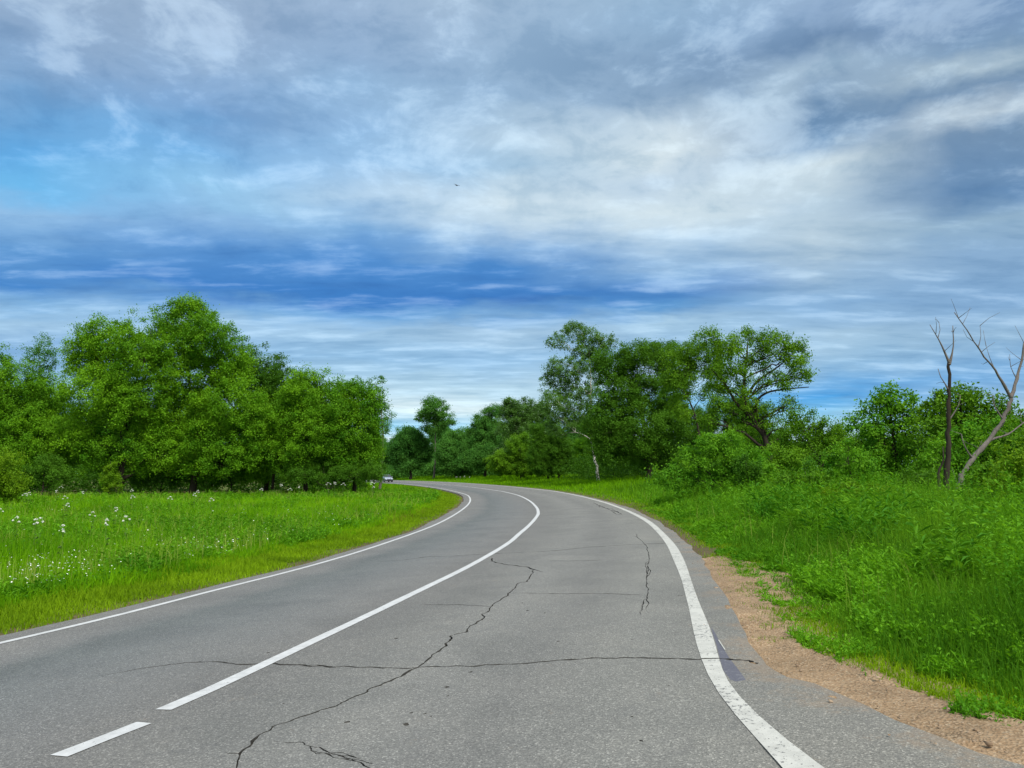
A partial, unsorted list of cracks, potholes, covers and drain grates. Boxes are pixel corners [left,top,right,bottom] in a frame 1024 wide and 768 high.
crack [113,537,758,768]
